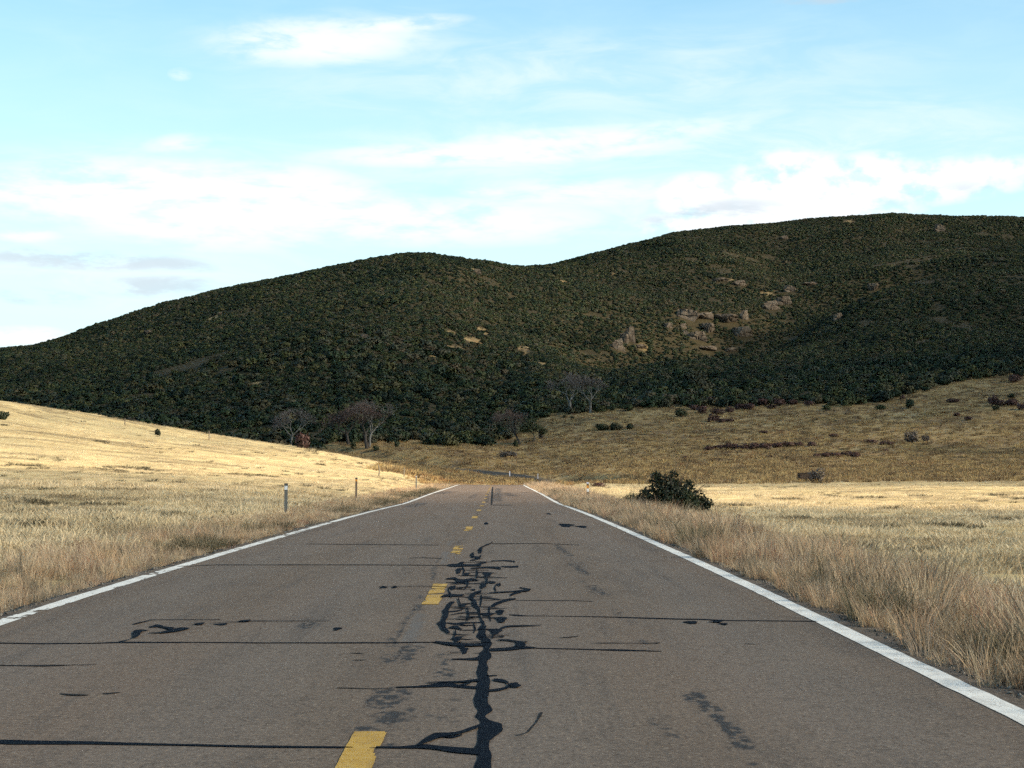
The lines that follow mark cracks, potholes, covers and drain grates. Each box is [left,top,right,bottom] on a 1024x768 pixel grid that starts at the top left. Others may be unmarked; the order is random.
crack [517,712,543,735]
